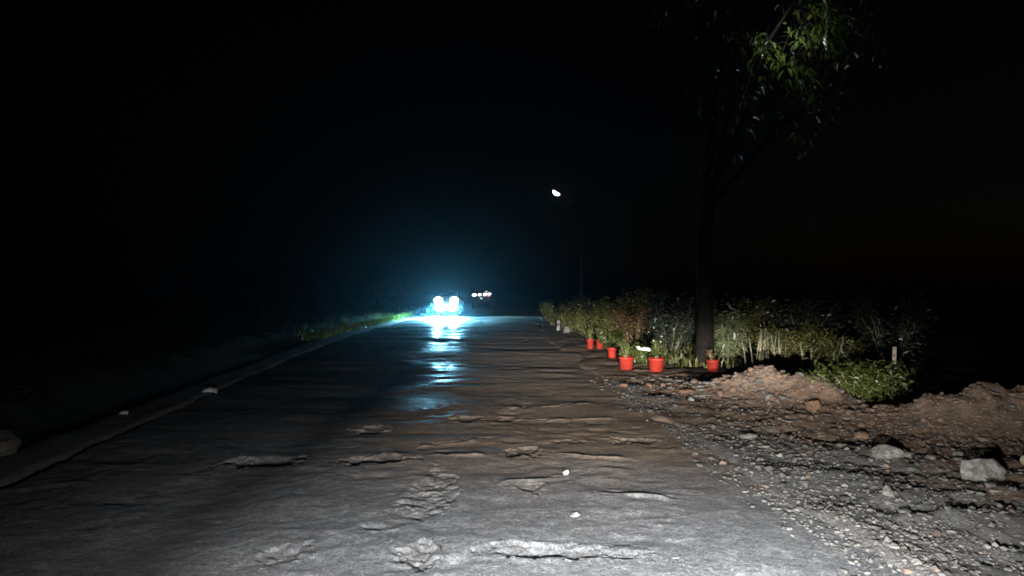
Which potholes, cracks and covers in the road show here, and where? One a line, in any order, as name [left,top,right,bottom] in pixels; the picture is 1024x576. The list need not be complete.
pothole [336,424,403,437]
pothole [507,478,550,498]
pothole [319,451,432,468]
pothole [380,536,449,572]
pothole [602,435,680,446]
pothole [247,538,322,570]
pothole [435,414,501,424]
pothole [387,457,463,526]
pothole [443,538,682,564]
pothole [205,454,316,473]
pothole [501,444,551,460]
